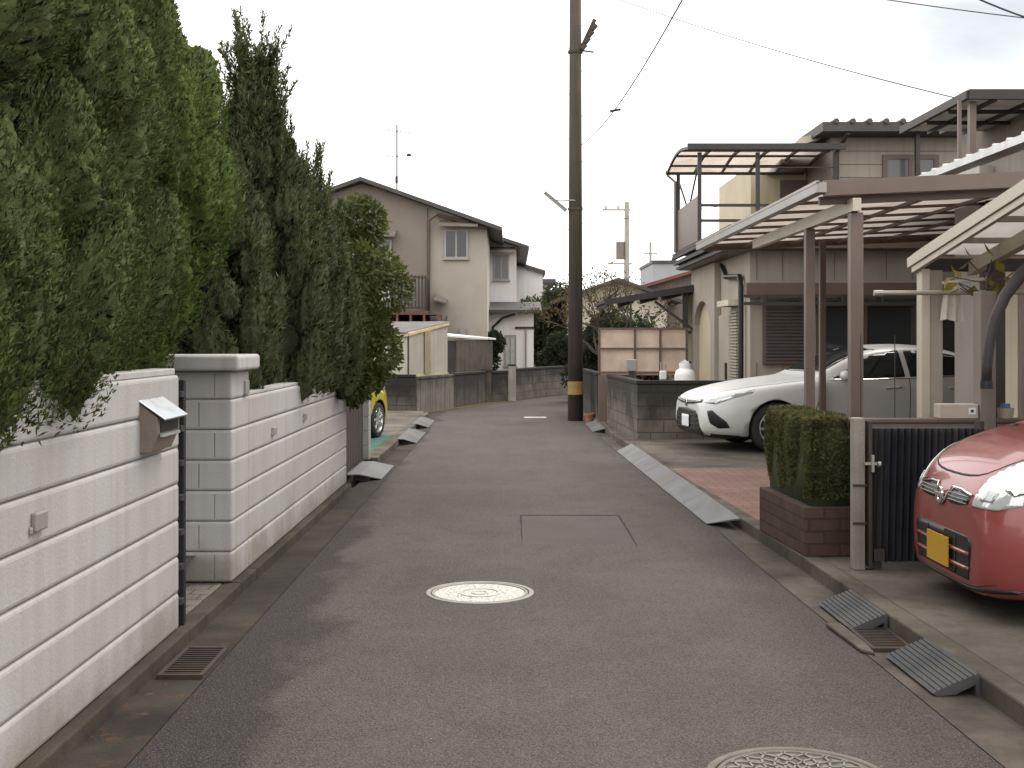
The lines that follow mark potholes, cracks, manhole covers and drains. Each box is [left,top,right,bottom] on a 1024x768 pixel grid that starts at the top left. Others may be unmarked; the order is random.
manhole cover [426,581,534,604]
drain grate [847,626,909,652]
drain grate [156,646,229,679]
manhole cover [707,747,880,768]
